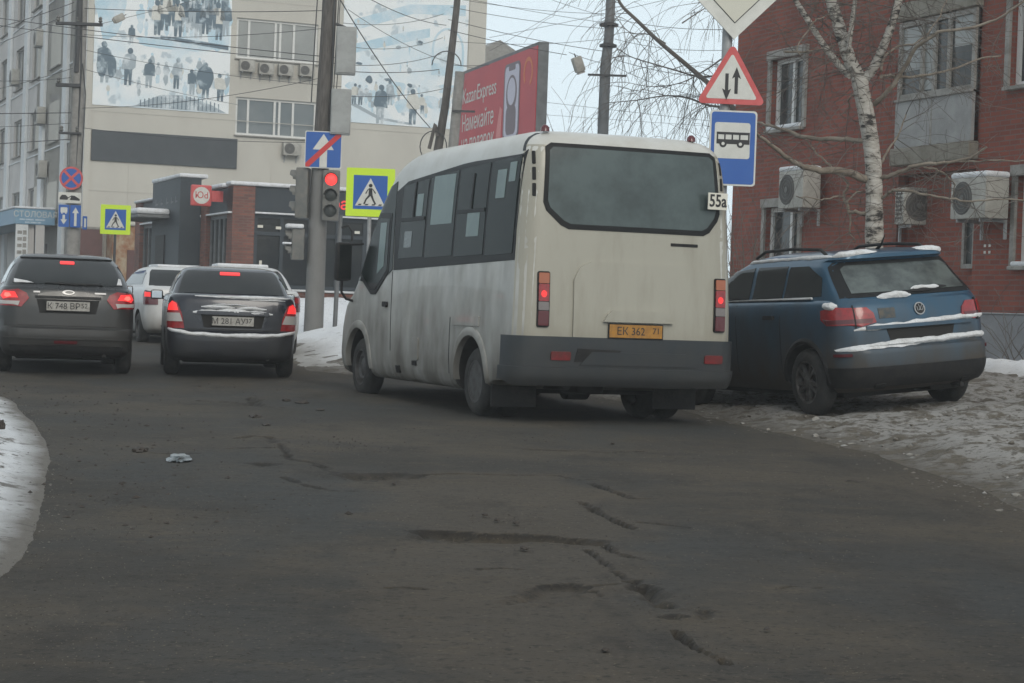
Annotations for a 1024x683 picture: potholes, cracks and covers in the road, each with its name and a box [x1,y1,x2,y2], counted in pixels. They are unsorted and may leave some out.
crack [669,629,735,666]
pothole [495,582,595,606]
crack [221,435,363,492]
crack [425,473,696,598]
